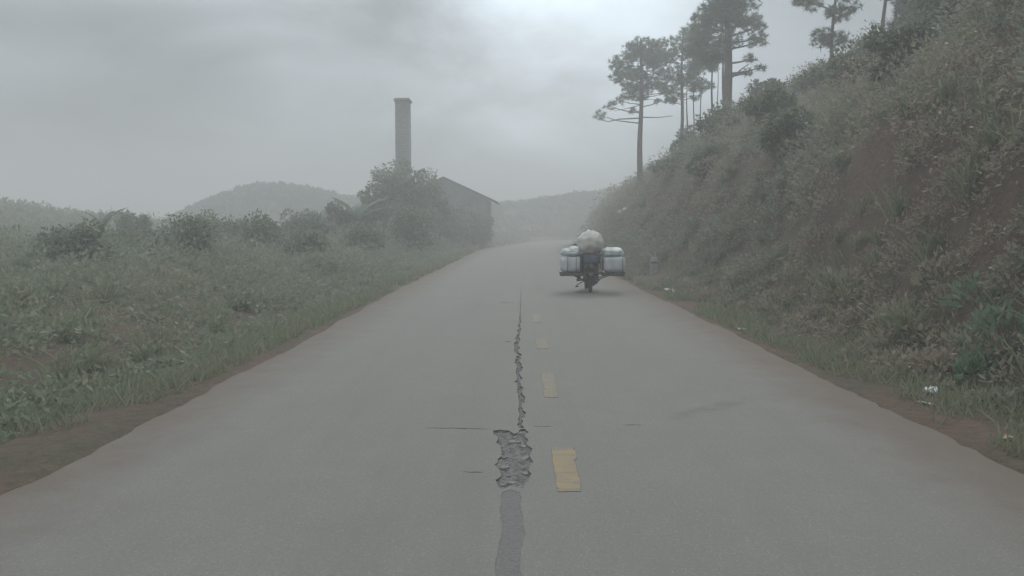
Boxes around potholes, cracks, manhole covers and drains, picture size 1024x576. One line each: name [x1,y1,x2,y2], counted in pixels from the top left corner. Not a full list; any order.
pothole [493,429,533,489]
crack [444,296,545,429]
